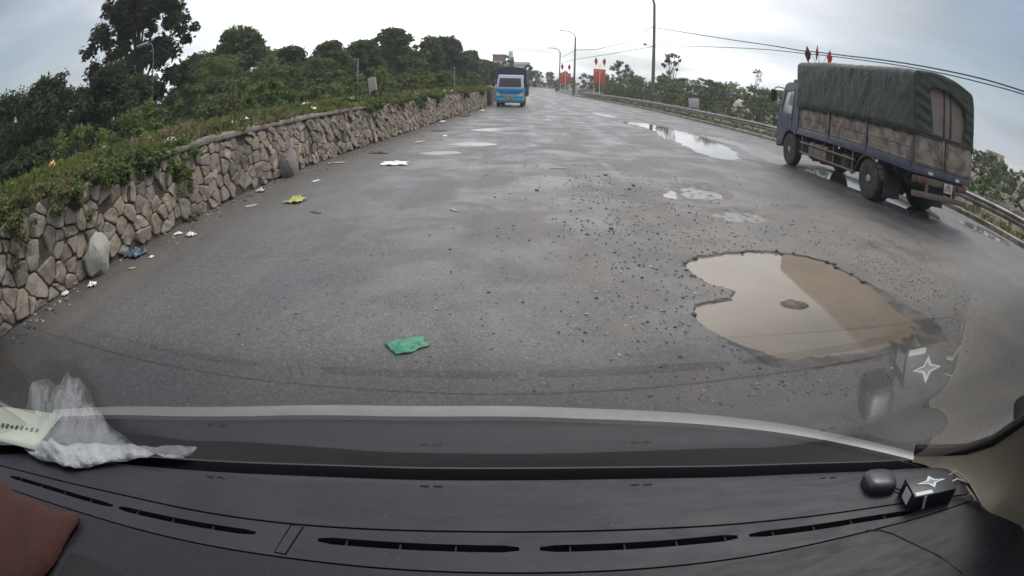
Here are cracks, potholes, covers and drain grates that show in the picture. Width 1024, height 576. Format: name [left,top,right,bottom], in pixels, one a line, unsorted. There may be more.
pothole [699,207,780,224]
pothole [668,184,735,202]
pothole [681,249,942,370]
